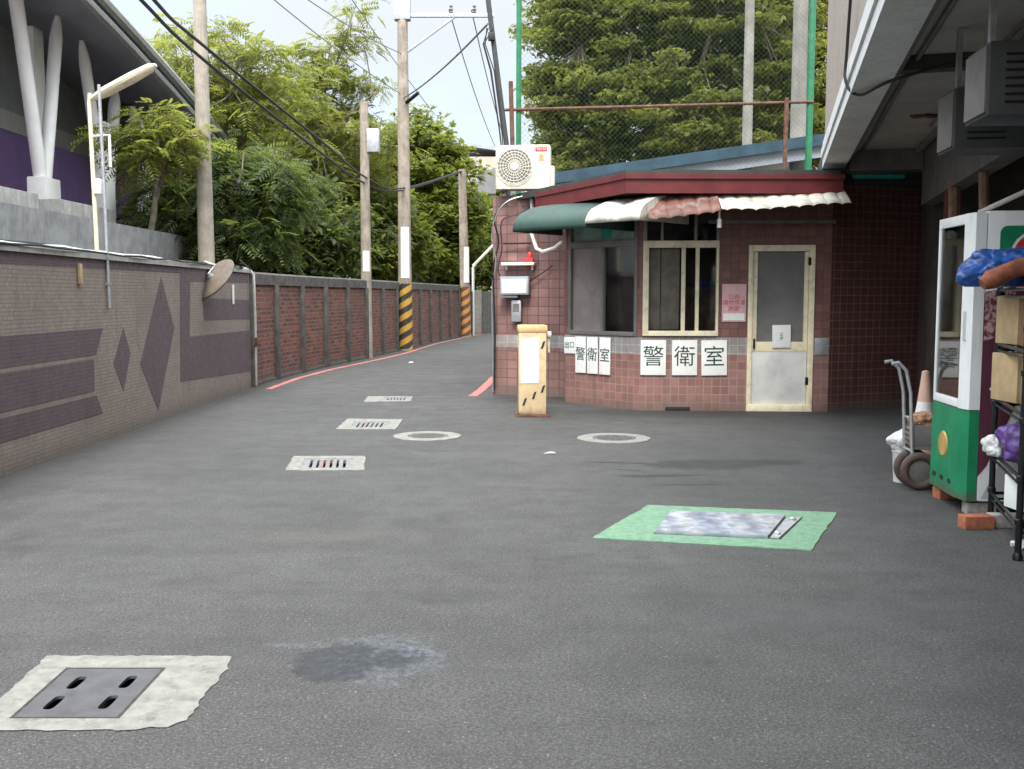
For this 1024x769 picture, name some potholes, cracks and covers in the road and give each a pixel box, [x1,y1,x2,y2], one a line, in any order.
manhole cover [592,505,836,551]
manhole cover [393,431,461,441]
manhole cover [577,433,651,444]
drain grate [336,418,404,430]
manhole cover [0,655,231,731]
drain grate [285,456,366,471]
